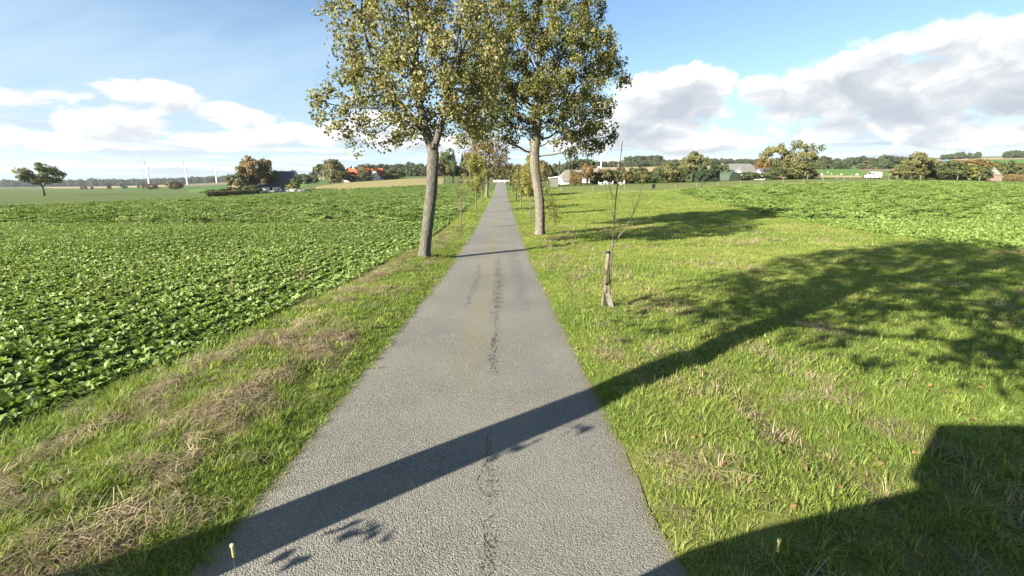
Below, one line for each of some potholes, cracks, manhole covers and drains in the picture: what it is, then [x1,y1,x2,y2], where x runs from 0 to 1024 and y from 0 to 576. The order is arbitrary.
crack [475,514,502,576]
crack [465,265,504,376]
crack [477,431,501,506]
